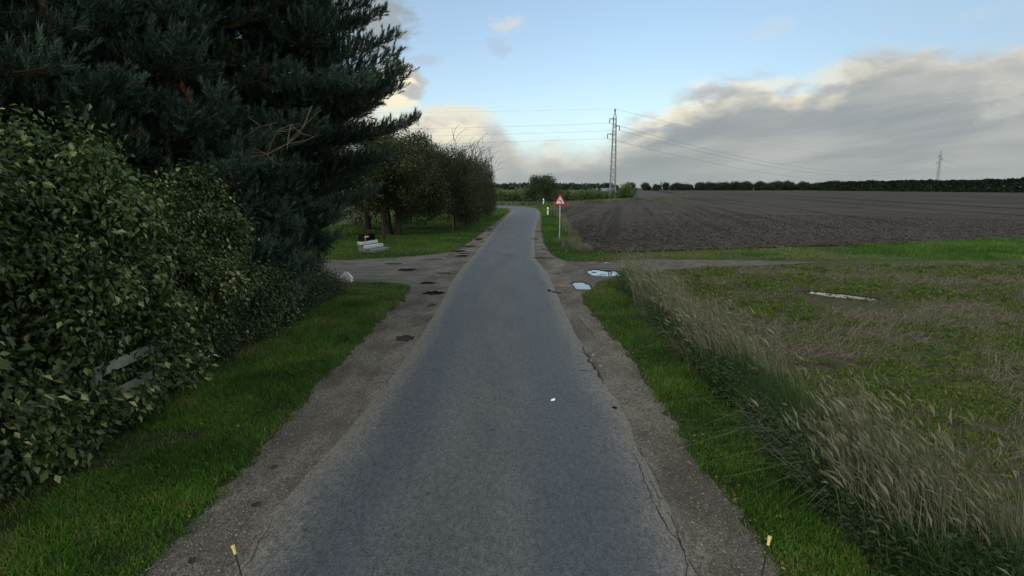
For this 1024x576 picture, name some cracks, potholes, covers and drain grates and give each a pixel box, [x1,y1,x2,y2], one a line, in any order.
pothole [570,281,593,290]
crack [239,516,276,574]
pothole [394,334,417,343]
crack [634,446,699,576]
pothole [583,269,620,277]
crack [578,318,605,384]
